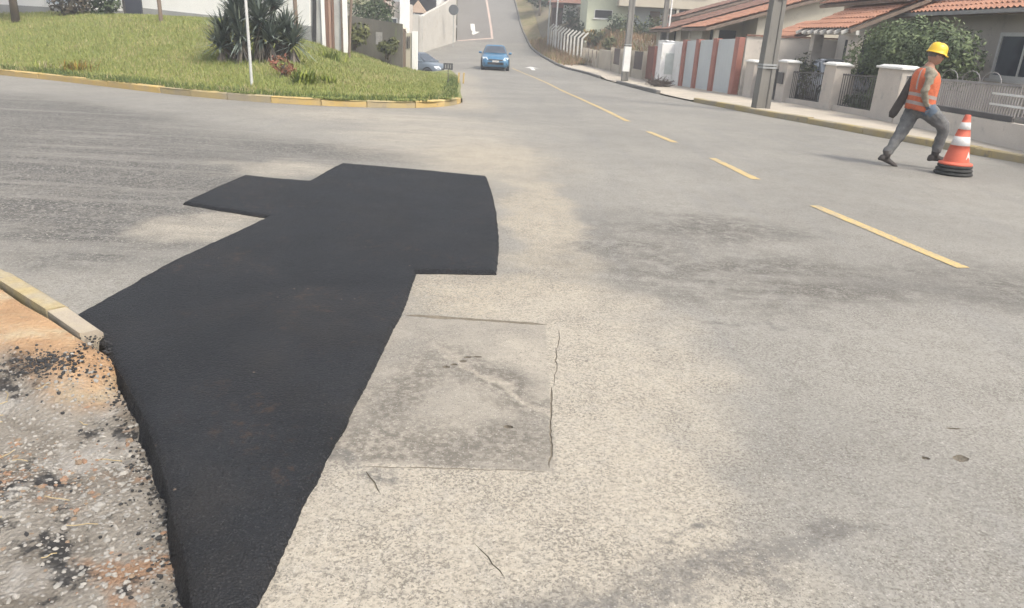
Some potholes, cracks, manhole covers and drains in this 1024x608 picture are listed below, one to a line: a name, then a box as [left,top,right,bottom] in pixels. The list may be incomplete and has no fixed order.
crack [366,315,560,493]
